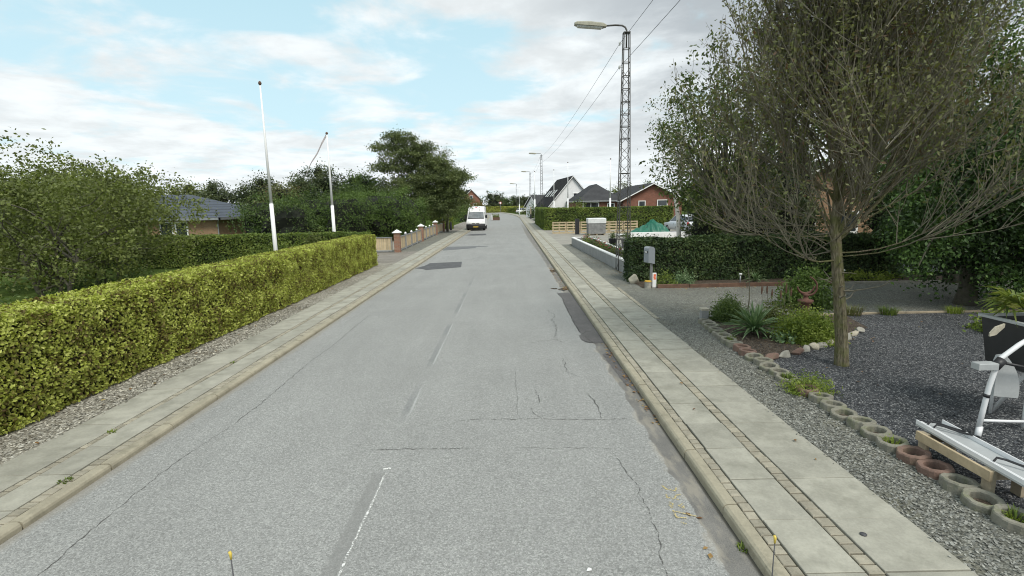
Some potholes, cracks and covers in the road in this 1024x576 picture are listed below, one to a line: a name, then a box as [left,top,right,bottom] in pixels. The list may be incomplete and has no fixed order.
crack [520,447,668,576]
crack [461,368,623,421]
crack [528,293,593,343]
